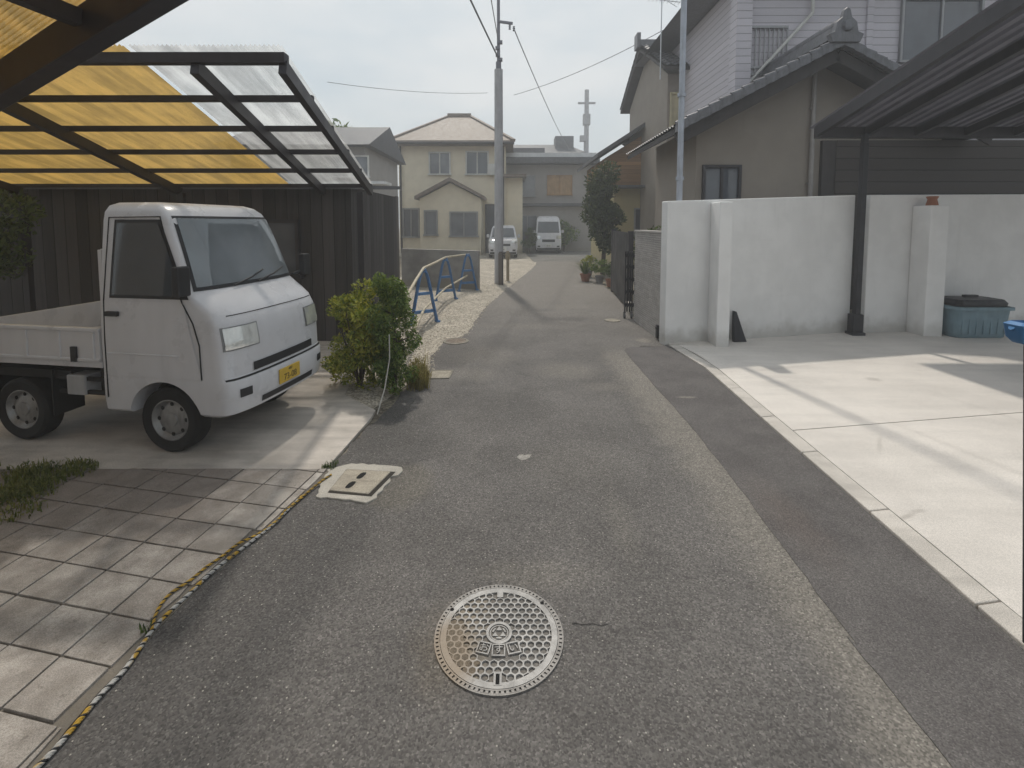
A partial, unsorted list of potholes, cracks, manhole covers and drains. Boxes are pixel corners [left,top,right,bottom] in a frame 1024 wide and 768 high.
utility cover [429,370,454,379]
utility cover [315,463,403,504]
manhole cover [434,585,564,697]
